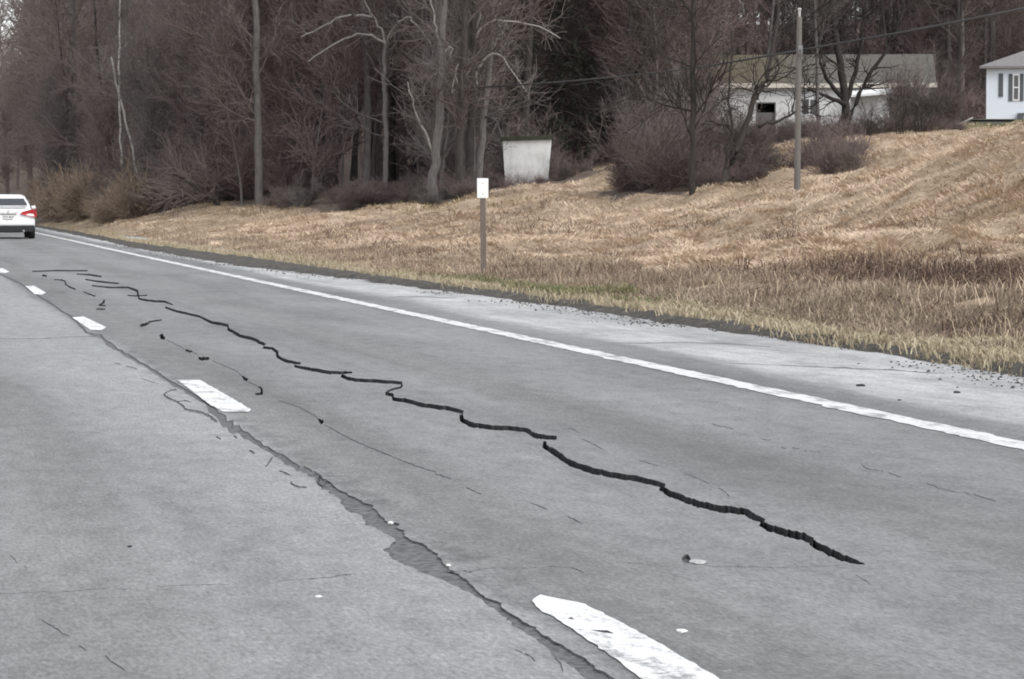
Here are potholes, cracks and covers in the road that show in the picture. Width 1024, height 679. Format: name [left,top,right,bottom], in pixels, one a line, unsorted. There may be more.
crack [733,363,944,374]
crack [0,270,902,595]
